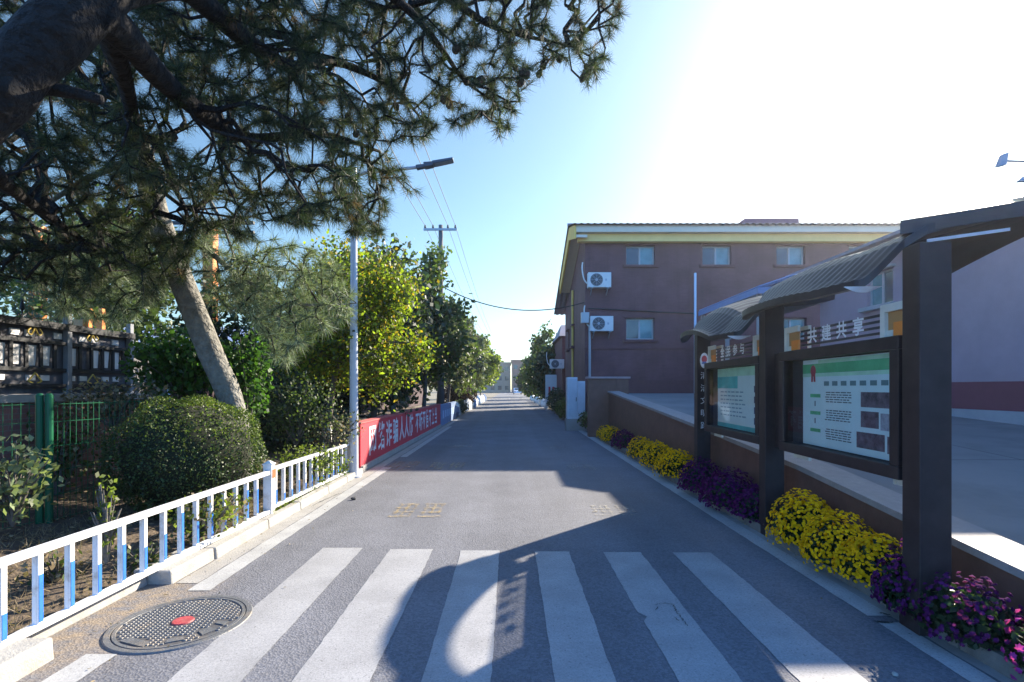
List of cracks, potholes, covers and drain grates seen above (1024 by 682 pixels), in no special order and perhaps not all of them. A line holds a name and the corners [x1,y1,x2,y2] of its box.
manhole cover [101,595,253,655]
